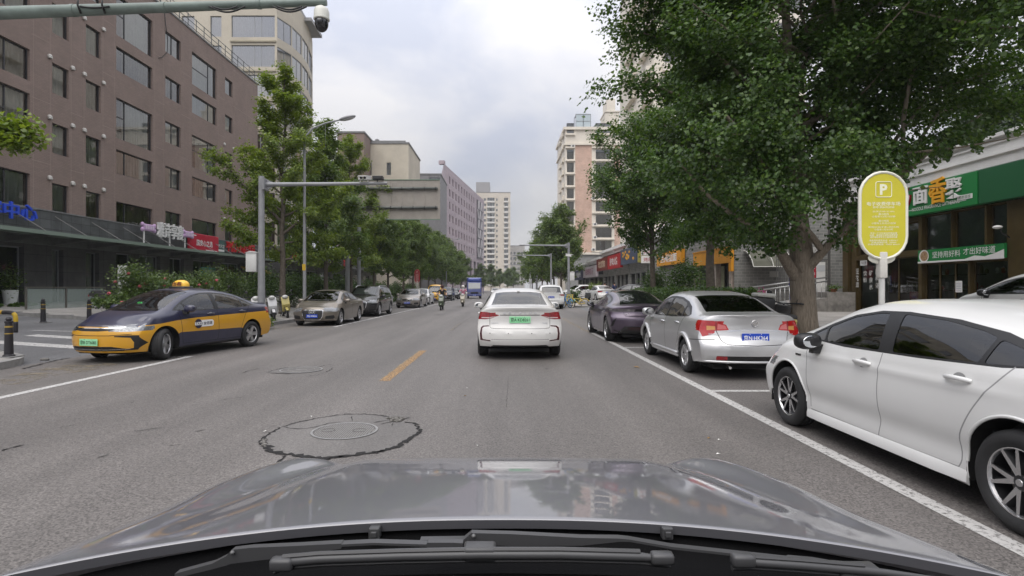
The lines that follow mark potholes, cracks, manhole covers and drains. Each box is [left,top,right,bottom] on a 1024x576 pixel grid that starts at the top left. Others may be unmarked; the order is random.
manhole cover [310,422,378,440]
